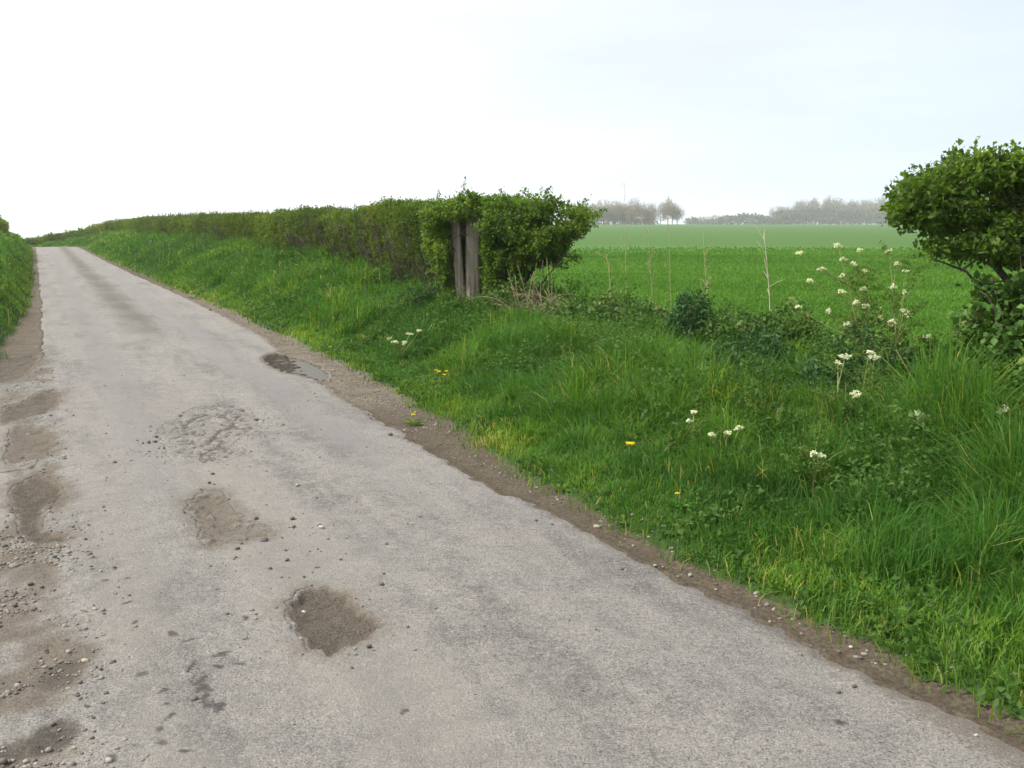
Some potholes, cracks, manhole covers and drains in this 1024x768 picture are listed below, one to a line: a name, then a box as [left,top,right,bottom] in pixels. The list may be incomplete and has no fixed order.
pothole [8,474,69,547]
pothole [3,425,60,465]
pothole [0,388,63,425]
pothole [285,587,385,657]
crack [155,403,262,465]
pothole [260,353,332,382]
pothole [184,490,273,548]
